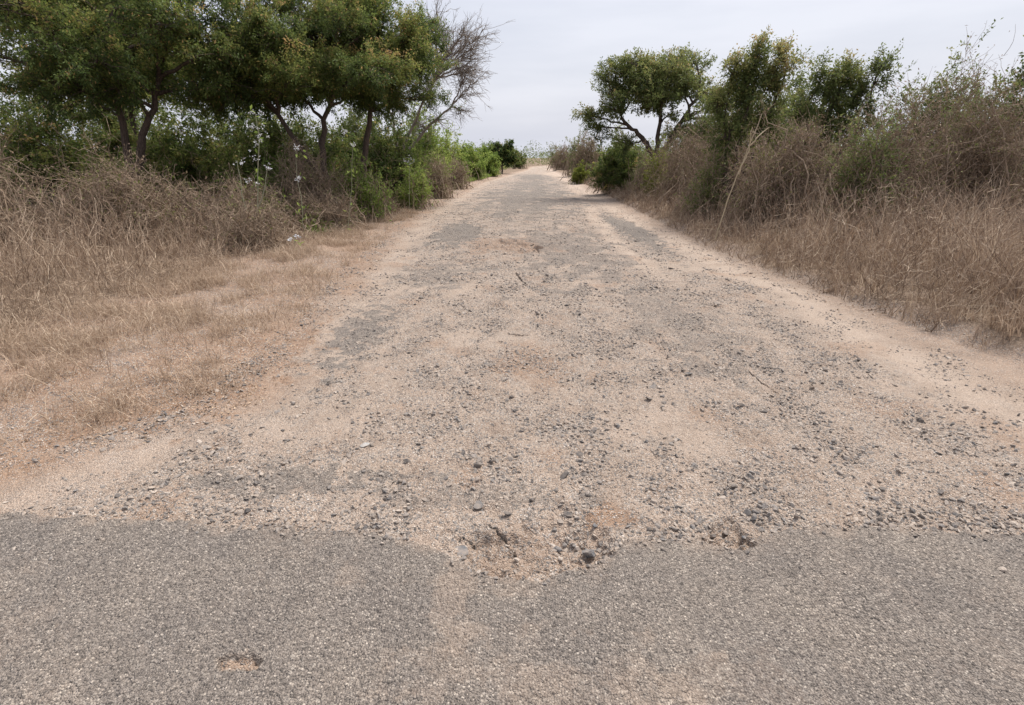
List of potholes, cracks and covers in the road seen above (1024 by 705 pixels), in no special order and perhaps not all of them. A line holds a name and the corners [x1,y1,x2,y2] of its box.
pothole [214,646,266,673]
pothole [698,515,758,551]
pothole [447,513,624,580]
